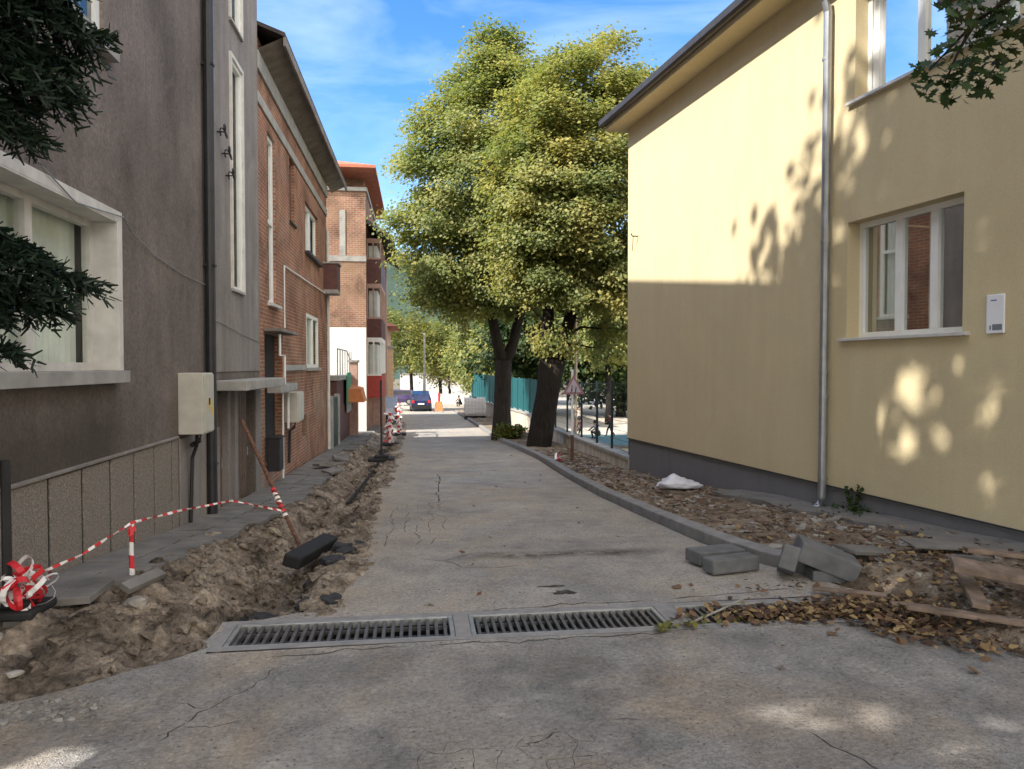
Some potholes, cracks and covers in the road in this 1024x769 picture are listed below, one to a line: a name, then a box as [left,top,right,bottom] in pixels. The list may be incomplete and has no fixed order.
crack [806,730,877,769]
crack [384,475,520,568]
crack [158,646,391,742]
drain grate [223,615,455,647]
crack [417,731,612,769]
drain grate [468,607,666,635]
